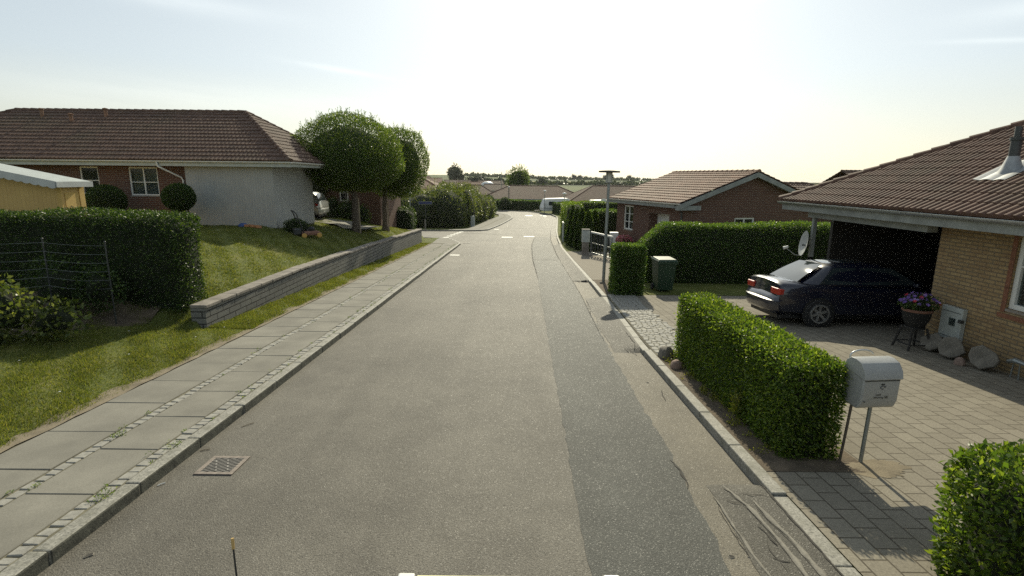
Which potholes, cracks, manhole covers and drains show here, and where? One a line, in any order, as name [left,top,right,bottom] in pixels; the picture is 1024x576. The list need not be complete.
drain grate [193,456,250,475]
crack [718,492,819,575]
